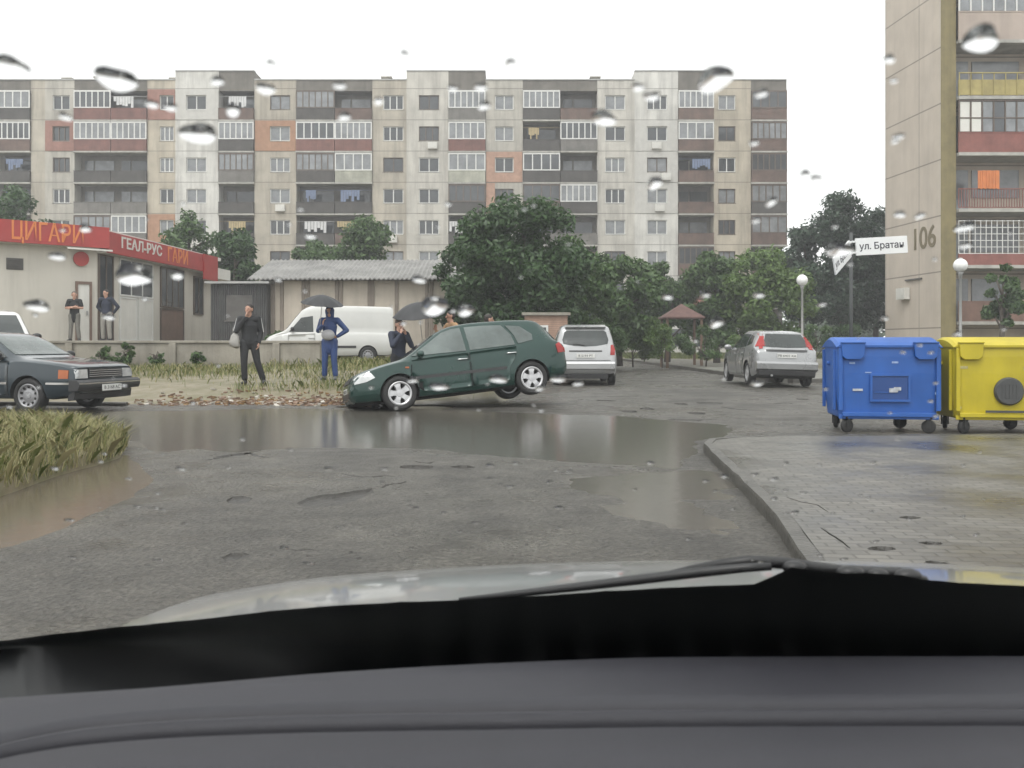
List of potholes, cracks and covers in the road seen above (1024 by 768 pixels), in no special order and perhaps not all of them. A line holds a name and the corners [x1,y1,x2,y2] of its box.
pothole [297,488,374,507]
pothole [227,496,253,504]
pothole [222,552,250,561]
crack [209,451,269,460]
